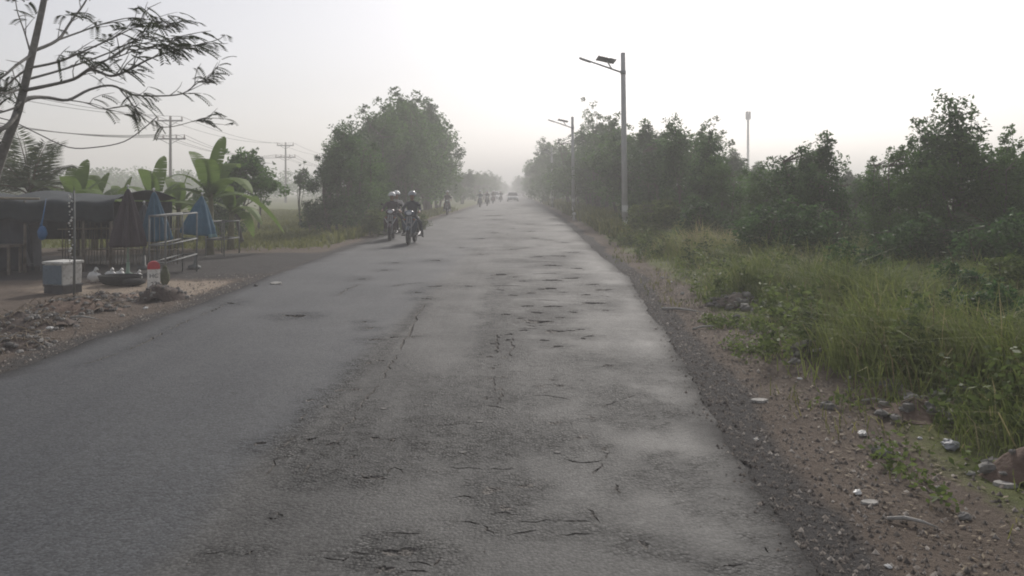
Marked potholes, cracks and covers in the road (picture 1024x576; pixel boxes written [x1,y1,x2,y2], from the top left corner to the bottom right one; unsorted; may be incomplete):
crack [405,557,441,572]
crack [264,414,313,476]
crack [452,454,621,536]
crack [487,377,505,409]
crack [332,304,425,459]
crack [322,551,368,561]
